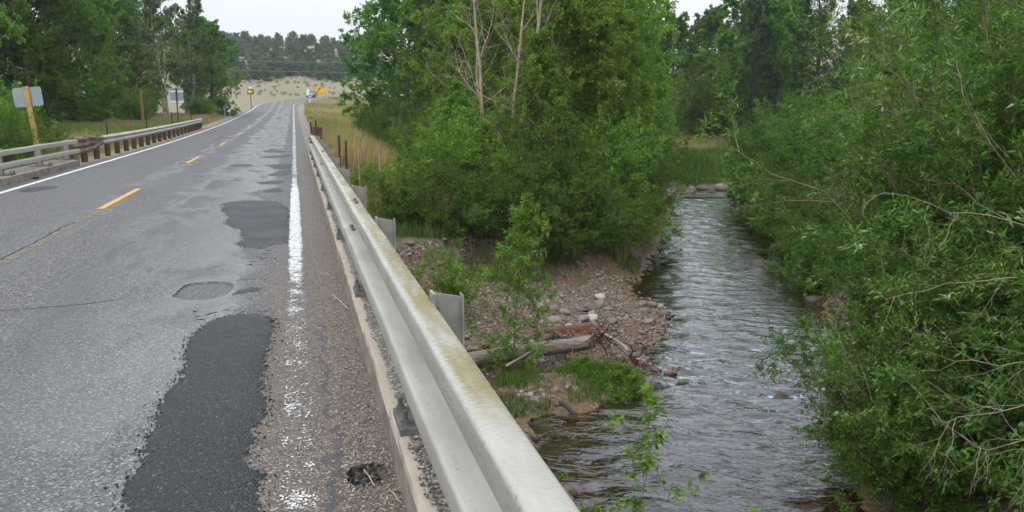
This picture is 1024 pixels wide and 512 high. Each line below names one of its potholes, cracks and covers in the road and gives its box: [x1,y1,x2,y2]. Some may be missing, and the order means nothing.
crack [1,299,123,311]
crack [0,222,75,260]
pothole [172,281,234,300]
pothole [346,463,390,487]
